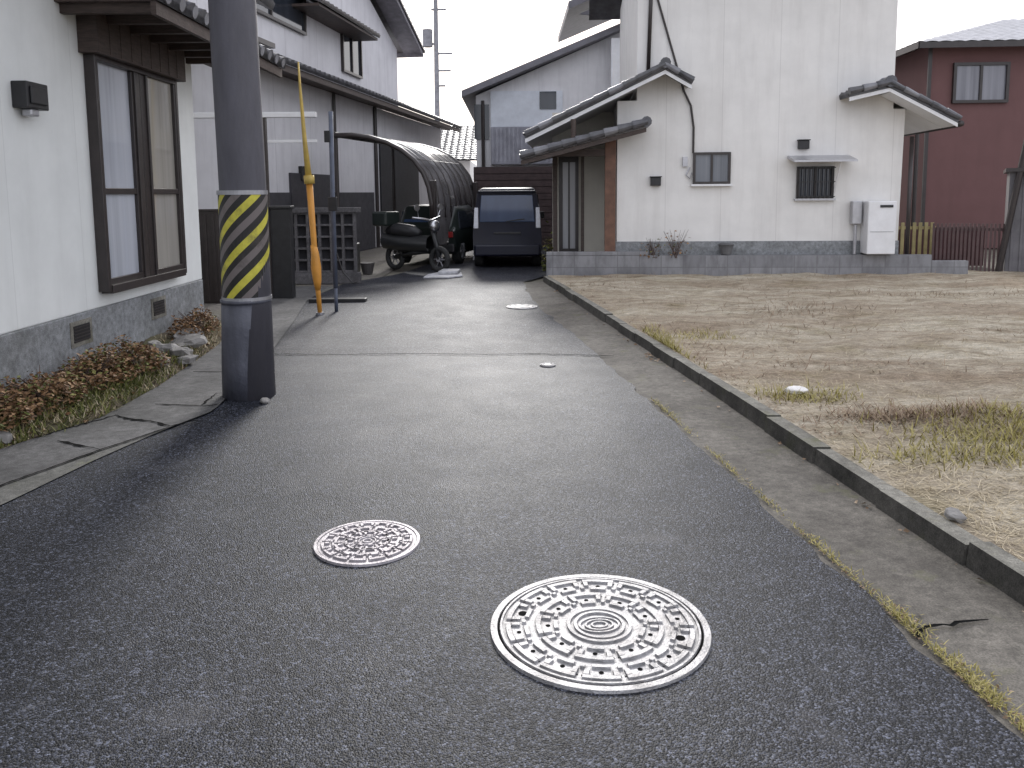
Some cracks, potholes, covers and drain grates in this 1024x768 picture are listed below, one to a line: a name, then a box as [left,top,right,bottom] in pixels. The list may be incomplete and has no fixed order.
manhole cover [490,574,712,694]
manhole cover [313,520,421,567]
crack [914,619,989,637]
crack [35,414,118,450]
